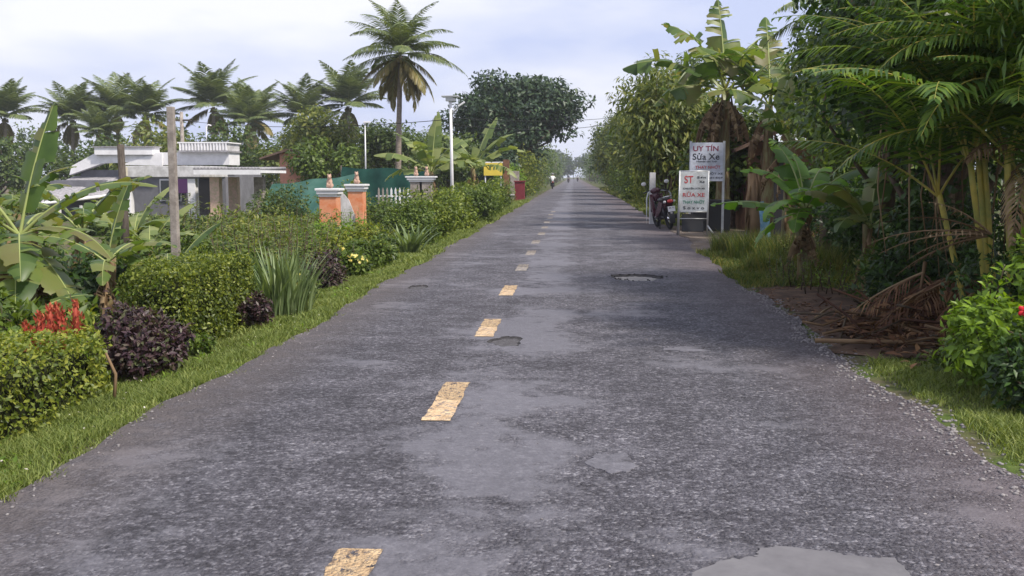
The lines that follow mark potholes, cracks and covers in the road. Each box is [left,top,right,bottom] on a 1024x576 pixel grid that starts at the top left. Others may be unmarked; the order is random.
pothole [487,336,523,347]
pothole [609,273,668,281]
